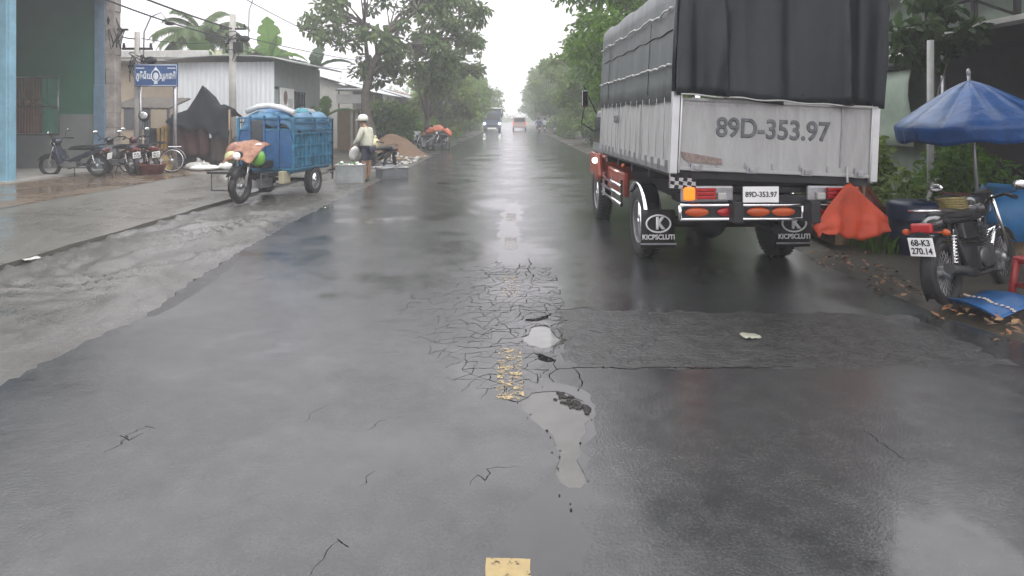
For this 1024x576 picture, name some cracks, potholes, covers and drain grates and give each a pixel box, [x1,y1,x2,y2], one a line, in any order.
pothole [521,325,560,348]
crack [397,260,790,402]
pothole [517,381,592,511]
